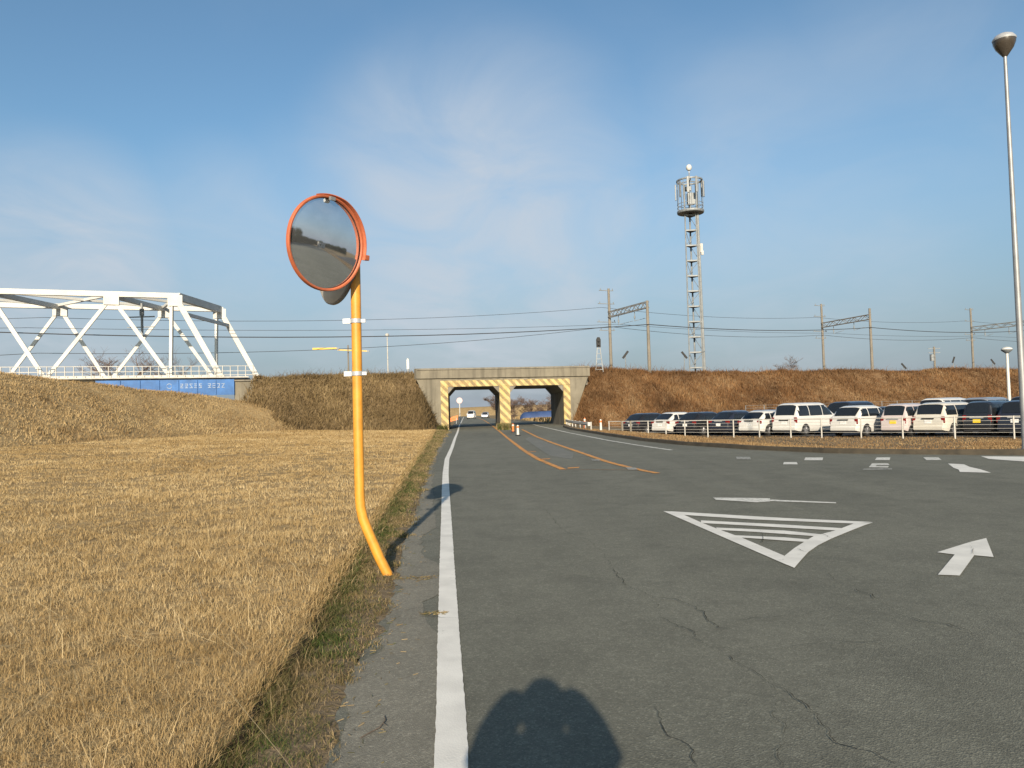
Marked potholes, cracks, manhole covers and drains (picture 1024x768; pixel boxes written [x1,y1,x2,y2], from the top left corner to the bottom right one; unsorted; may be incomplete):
crack [613,569,980,767]
